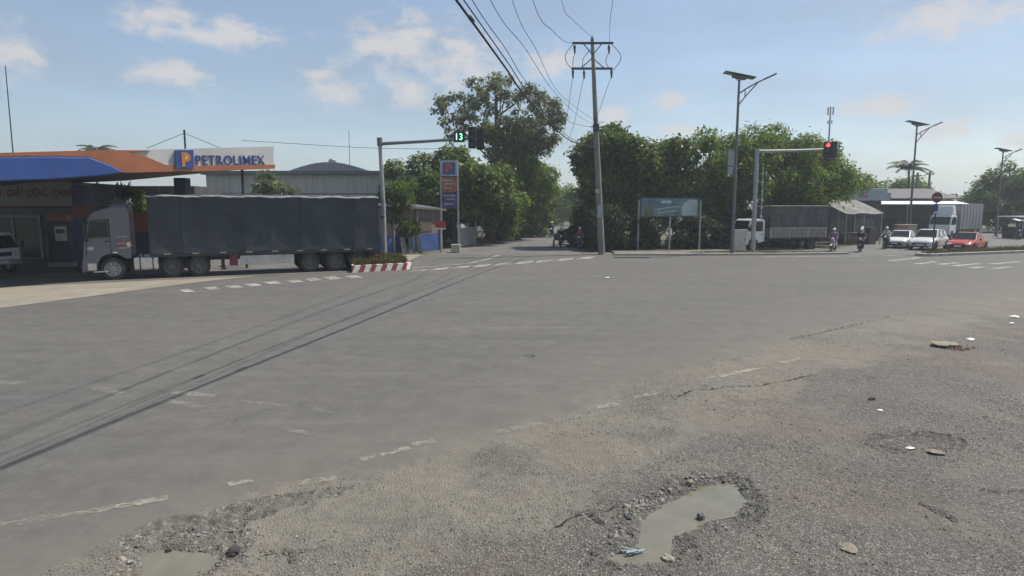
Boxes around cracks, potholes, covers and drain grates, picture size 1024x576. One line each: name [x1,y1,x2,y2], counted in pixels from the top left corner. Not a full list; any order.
pothole [582,472,771,573]
pothole [863,430,970,454]
pothole [103,485,355,576]
crack [554,506,614,528]
